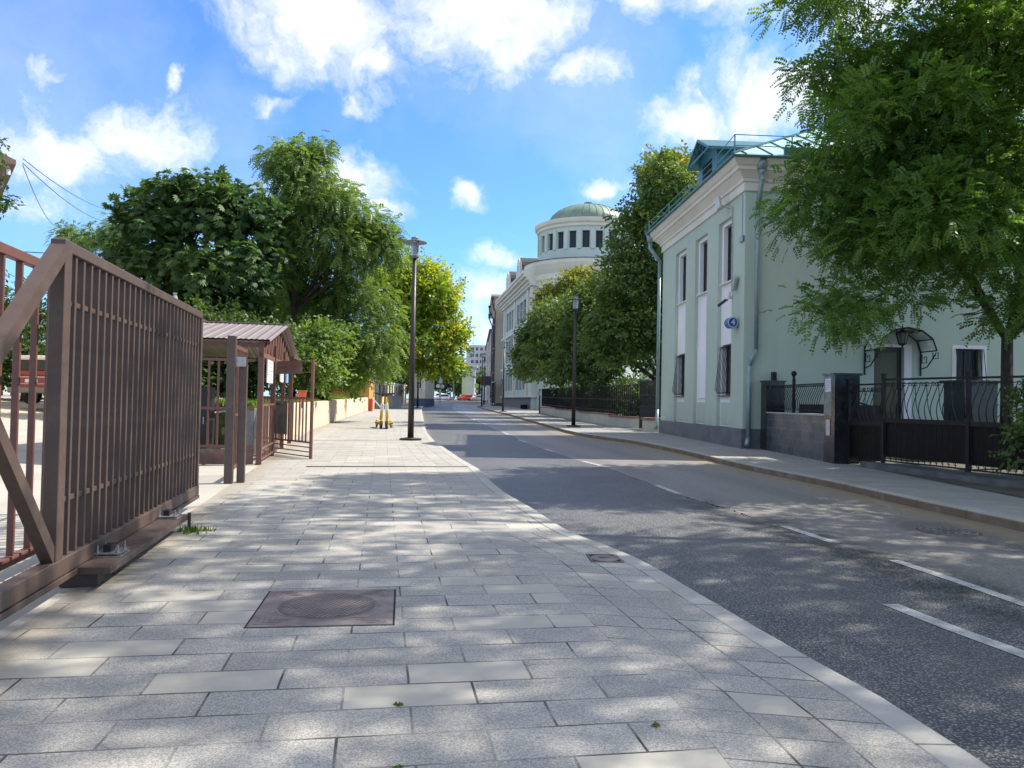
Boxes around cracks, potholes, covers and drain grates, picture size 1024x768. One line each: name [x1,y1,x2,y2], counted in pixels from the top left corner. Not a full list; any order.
manhole cover [586,554,624,563]
manhole cover [244,589,396,628]
manhole cover [915,526,982,537]
